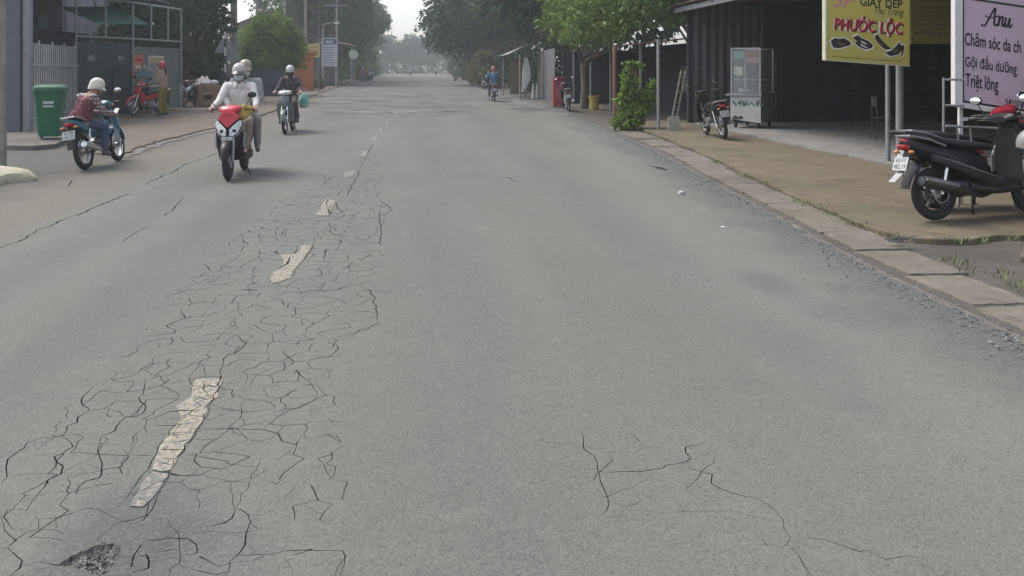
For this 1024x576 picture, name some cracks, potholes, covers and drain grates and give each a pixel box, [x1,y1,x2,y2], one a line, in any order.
crack [546,433,919,576]
pothole [59,543,121,575]
crack [0,145,392,576]
